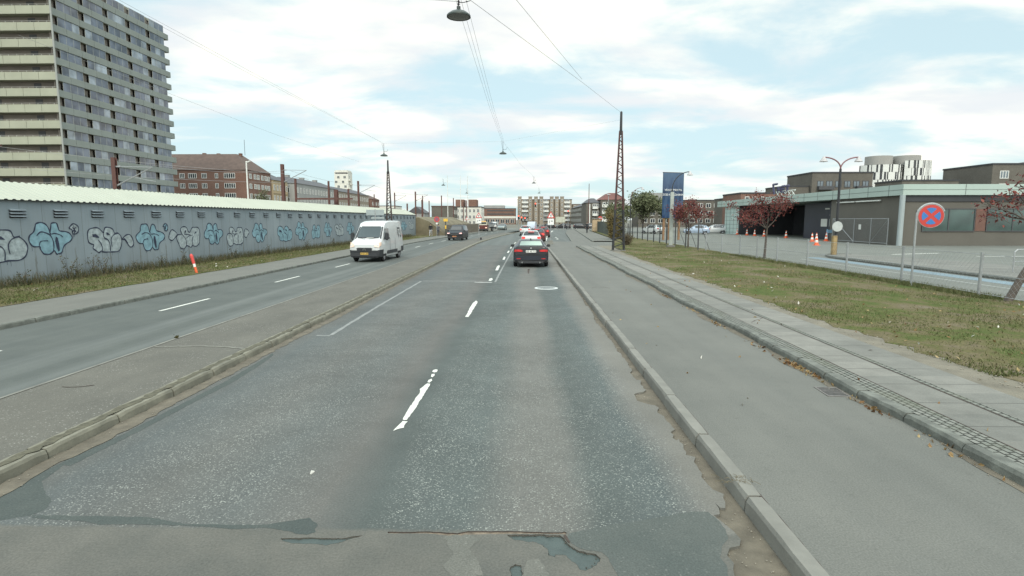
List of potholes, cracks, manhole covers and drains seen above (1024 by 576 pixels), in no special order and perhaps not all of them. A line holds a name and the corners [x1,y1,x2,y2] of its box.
pothole [508,534,600,571]
pothole [510,564,523,576]
drain grate [814,387,852,397]
